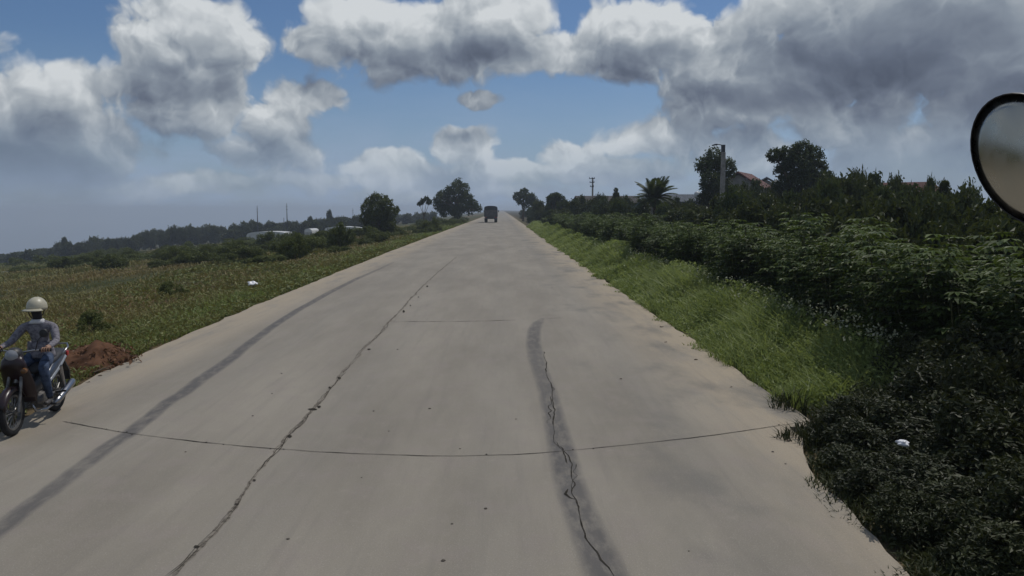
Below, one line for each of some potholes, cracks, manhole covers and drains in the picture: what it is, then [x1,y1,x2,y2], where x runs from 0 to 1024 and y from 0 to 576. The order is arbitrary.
crack [64,257,806,576]
